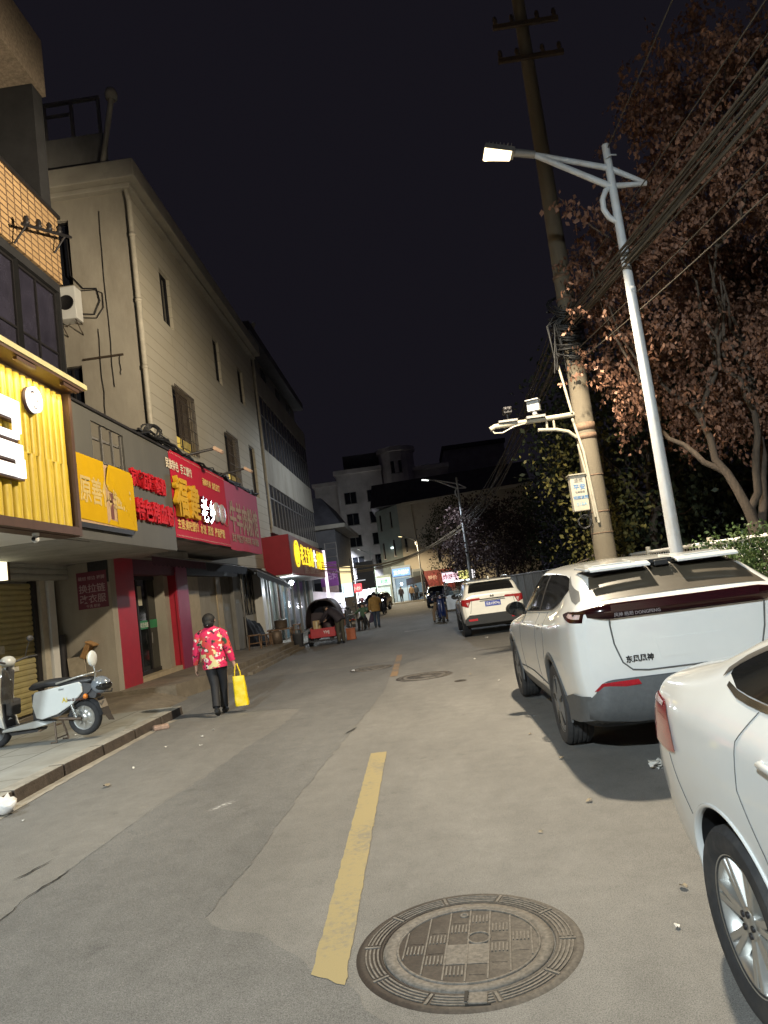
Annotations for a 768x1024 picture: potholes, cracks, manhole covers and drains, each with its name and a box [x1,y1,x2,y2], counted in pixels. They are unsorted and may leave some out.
manhole cover [396,671,453,681]
manhole cover [356,894,584,1014]
crack [0,772,210,920]
